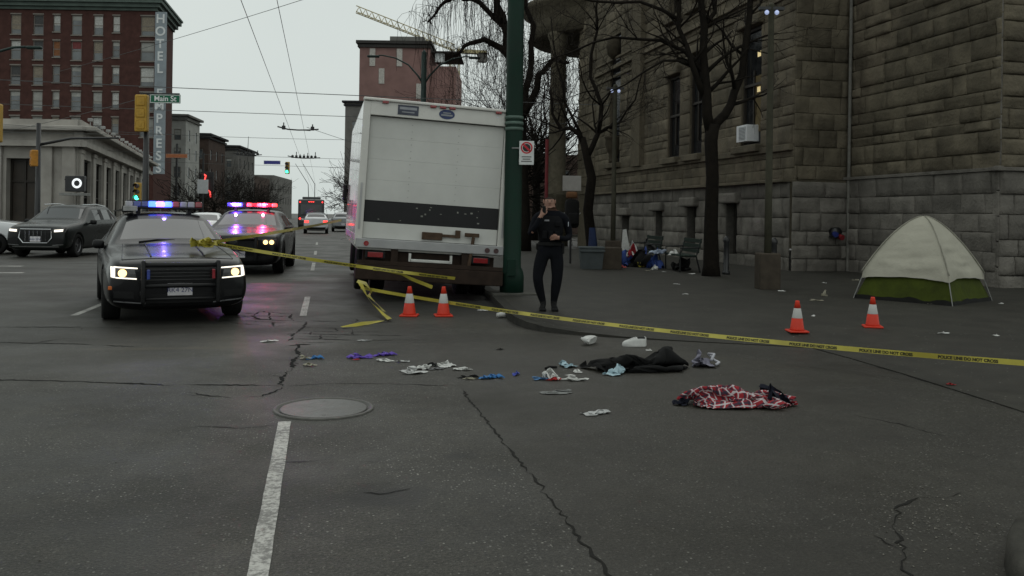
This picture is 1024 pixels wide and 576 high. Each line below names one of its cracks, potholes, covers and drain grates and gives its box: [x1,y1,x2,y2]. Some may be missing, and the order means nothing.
crack [874,492,961,576]
manhole cover [273,397,374,420]
crack [0,311,442,398]
